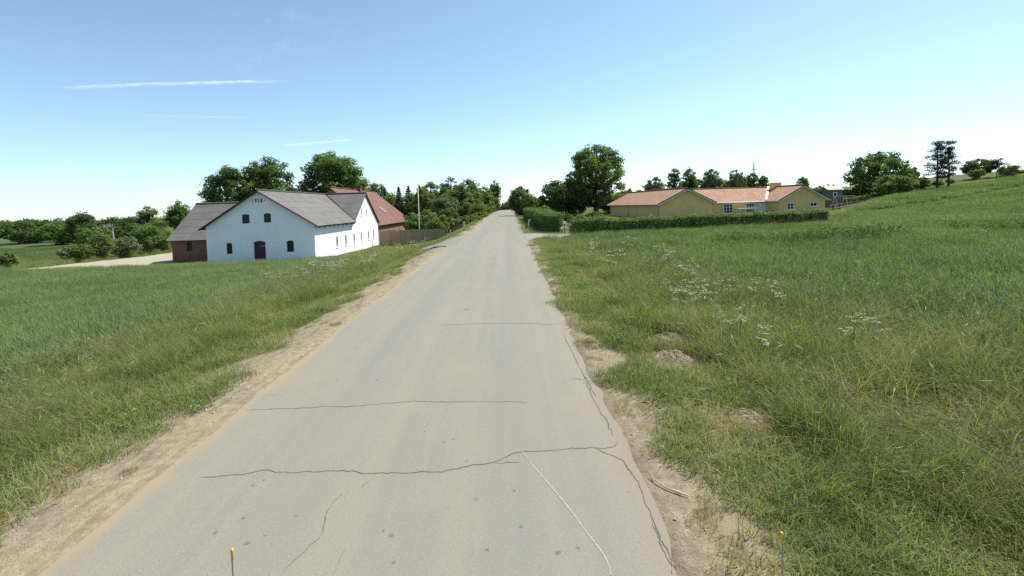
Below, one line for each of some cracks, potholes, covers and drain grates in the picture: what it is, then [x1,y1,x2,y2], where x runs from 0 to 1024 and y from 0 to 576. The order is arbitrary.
crack [216,323,678,574]
